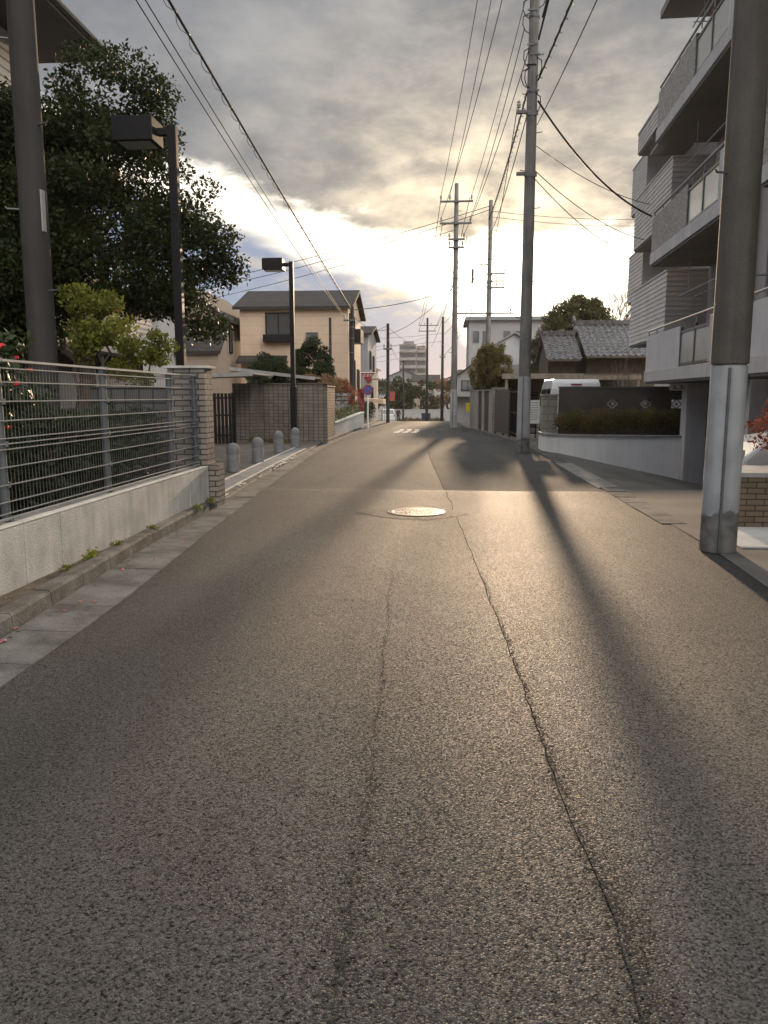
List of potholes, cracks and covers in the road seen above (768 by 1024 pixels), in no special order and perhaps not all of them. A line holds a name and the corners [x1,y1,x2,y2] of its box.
crack [311,556,395,1024]
manhole cover [387,507,445,516]
crack [427,451,675,1024]
